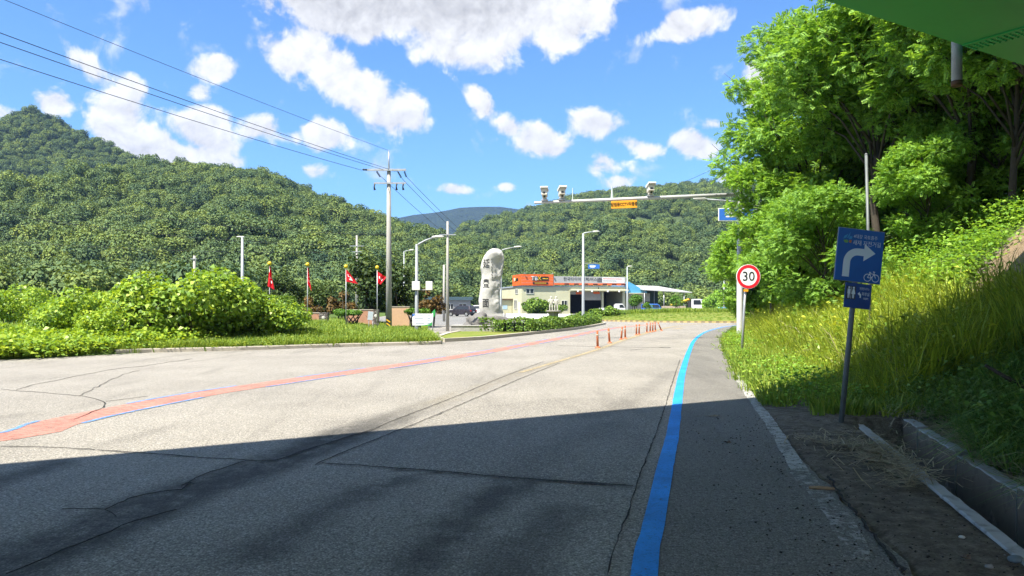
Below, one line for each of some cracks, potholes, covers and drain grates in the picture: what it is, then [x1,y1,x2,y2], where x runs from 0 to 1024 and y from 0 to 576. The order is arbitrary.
crack [4,359,188,419]
